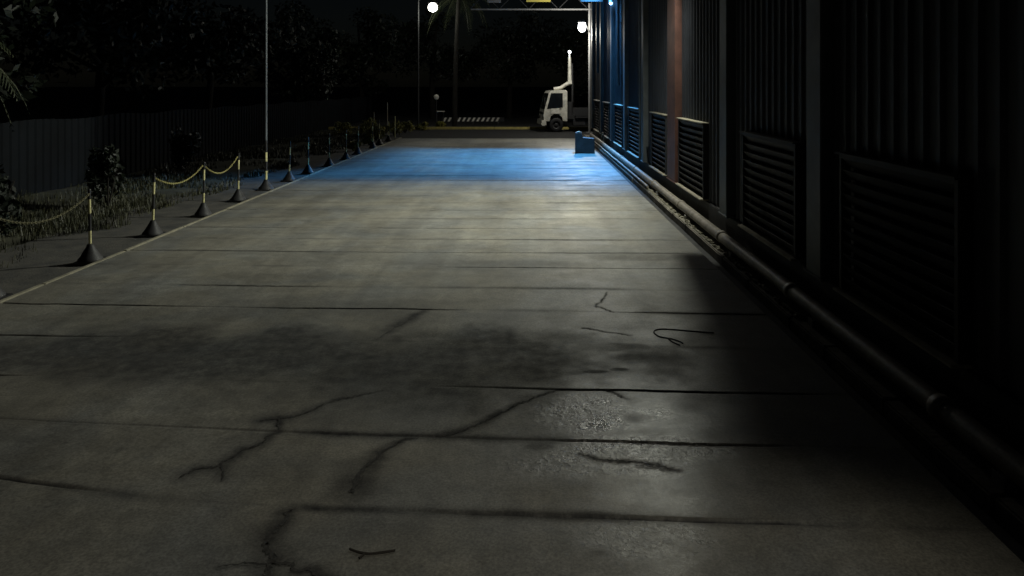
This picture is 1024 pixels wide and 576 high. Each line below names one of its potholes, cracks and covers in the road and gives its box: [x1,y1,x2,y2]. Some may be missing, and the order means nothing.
crack [436,389,557,436]
crack [218,509,321,576]
crack [579,453,674,470]
crack [348,438,412,492]
crack [179,390,383,479]
